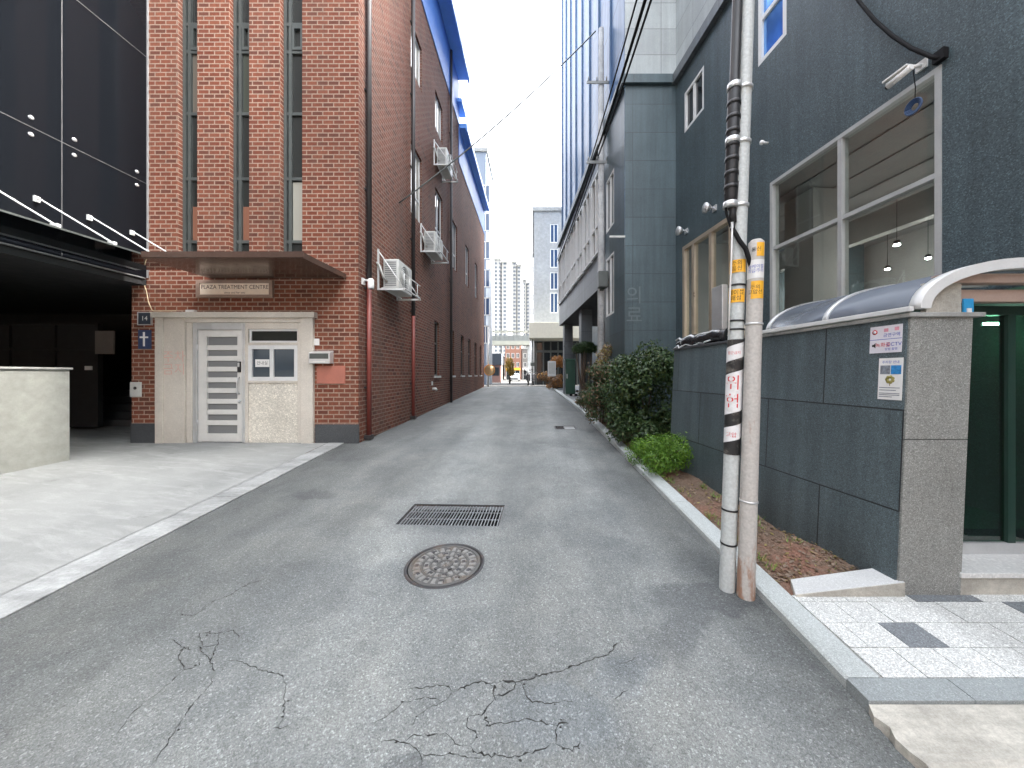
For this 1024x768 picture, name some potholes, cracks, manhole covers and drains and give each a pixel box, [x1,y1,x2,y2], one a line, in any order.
crack [116,579,290,764]
crack [372,640,635,766]
drain grate [396,504,505,526]
manhole cover [404,543,485,589]
